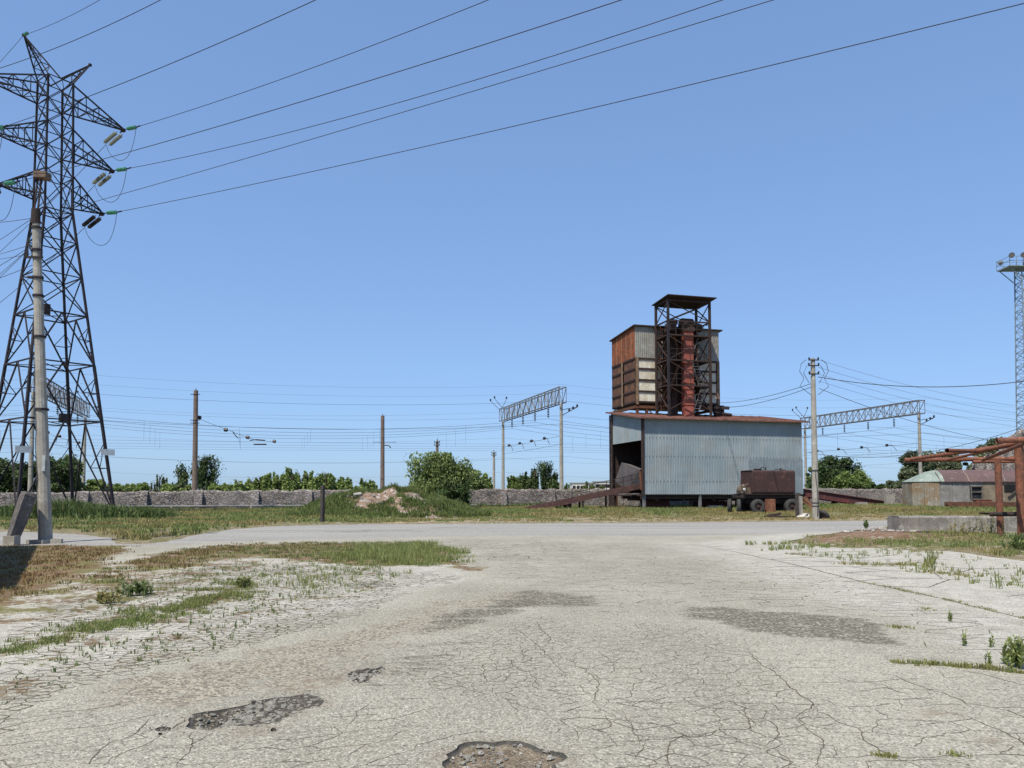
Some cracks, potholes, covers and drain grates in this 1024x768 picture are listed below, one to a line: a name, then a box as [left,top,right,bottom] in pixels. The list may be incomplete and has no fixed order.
pothole [343,665,400,686]
pothole [165,691,345,739]
crack [393,616,1024,768]
pothole [403,731,598,768]
crack [0,563,462,730]
crack [0,687,477,768]
